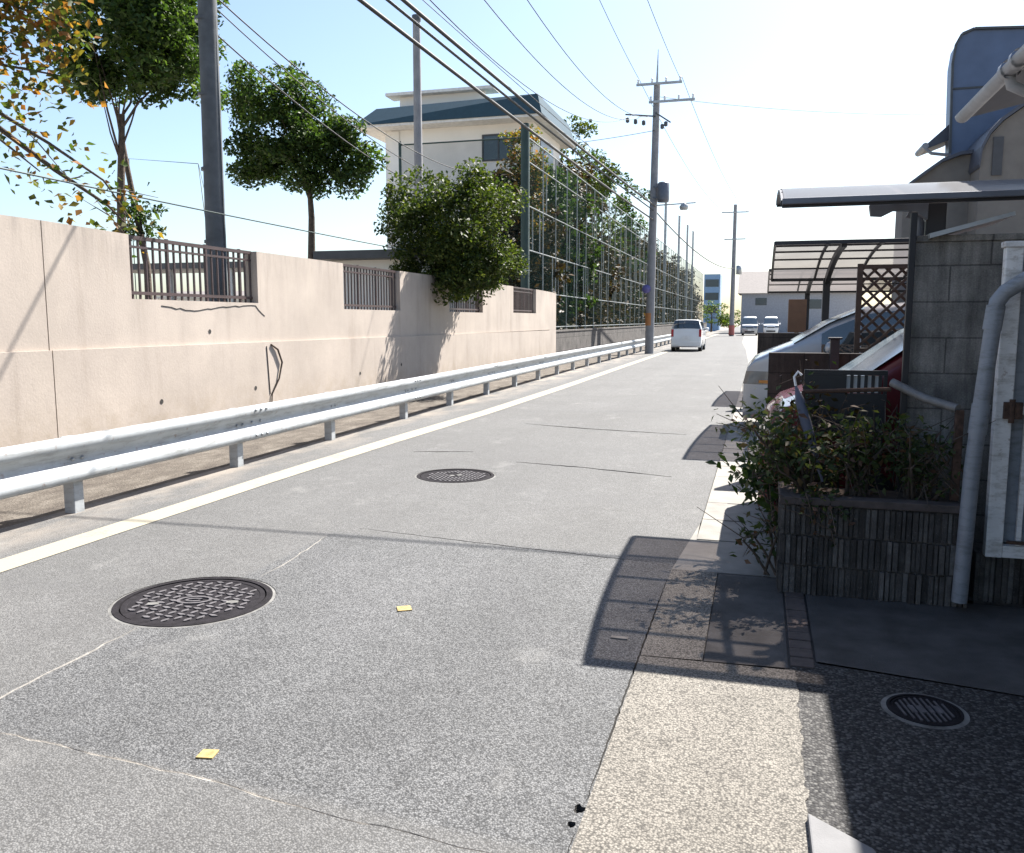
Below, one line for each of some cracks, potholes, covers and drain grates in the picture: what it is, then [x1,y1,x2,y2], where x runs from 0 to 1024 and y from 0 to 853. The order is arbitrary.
manhole cover [881,693,970,730]
manhole cover [108,577,276,628]
crack [260,535,328,577]
crack [0,628,135,699]
manhole cover [415,469,496,483]
